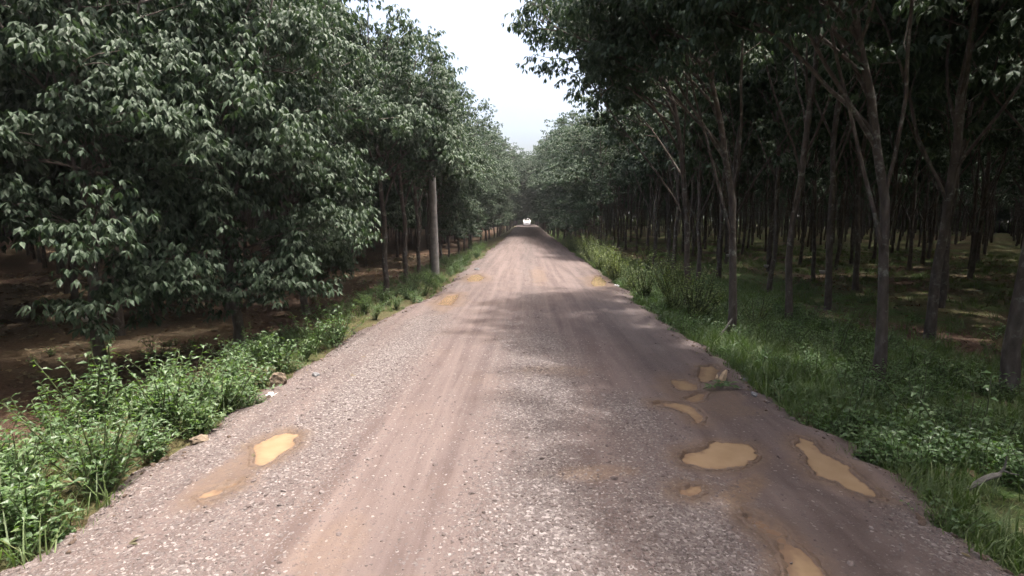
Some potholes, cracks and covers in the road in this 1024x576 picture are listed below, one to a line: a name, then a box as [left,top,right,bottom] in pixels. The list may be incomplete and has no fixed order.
pothole [463,274,488,282]
pothole [587,275,609,287]
pothole [694,364,724,383]
pothole [650,399,708,426]
pothole [789,434,890,502]
pothole [674,440,762,471]
pothole [735,505,828,576]
pothole [433,293,462,306]
pothole [678,391,711,404]
pothole [191,476,246,503]
pothole [667,378,702,392]
pothole [247,429,303,467]
